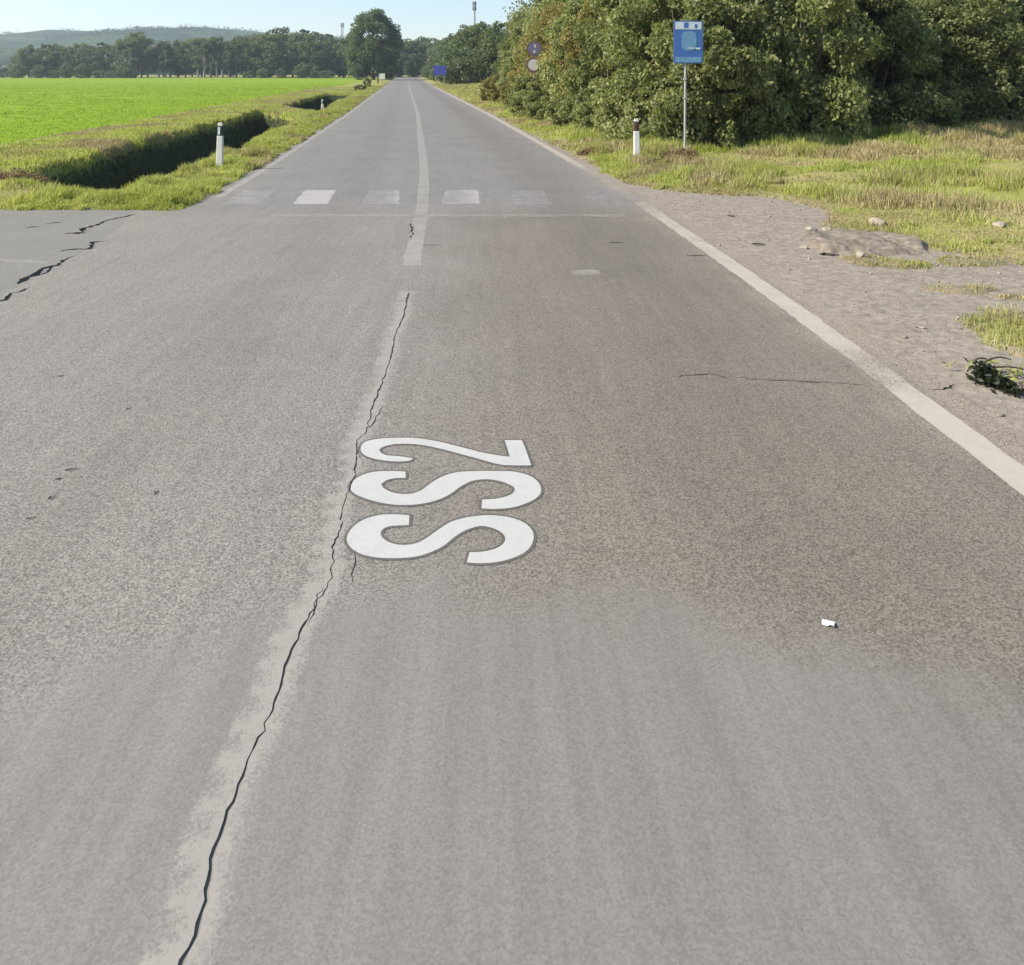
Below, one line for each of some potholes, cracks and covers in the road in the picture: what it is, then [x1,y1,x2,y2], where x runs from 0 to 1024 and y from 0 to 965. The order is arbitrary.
crack [0,214,134,302]
crack [178,292,410,965]
crack [672,374,866,386]
